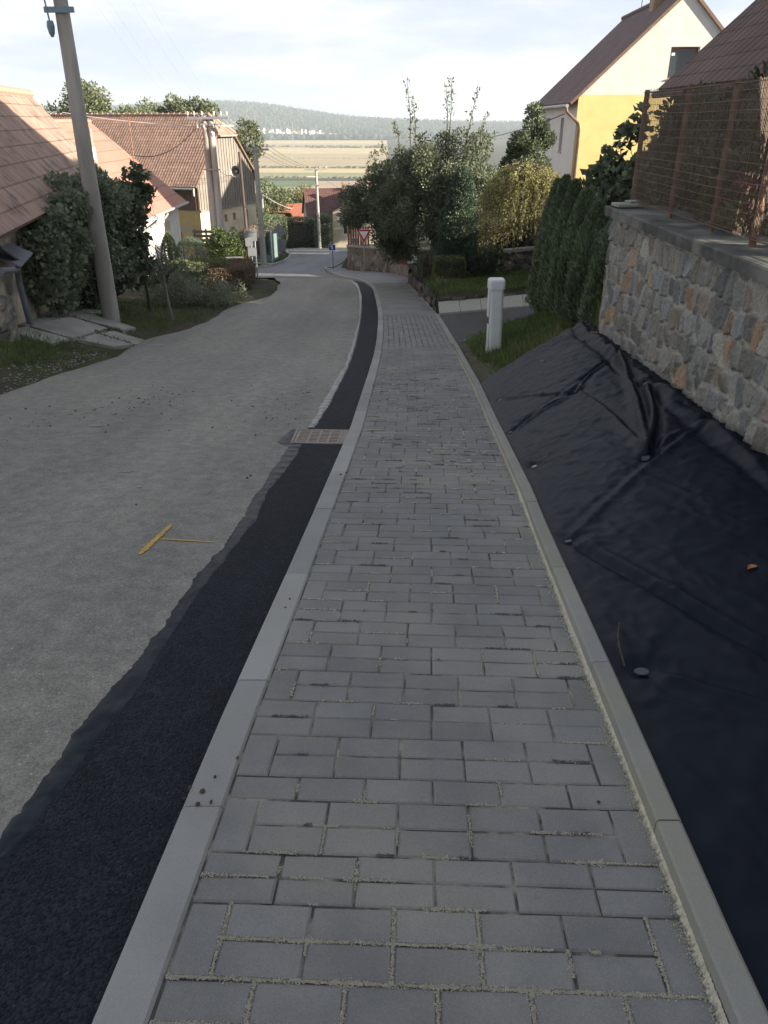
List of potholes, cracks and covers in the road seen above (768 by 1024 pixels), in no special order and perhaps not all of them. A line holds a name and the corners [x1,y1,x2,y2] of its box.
drain grate [290,429,349,444]
